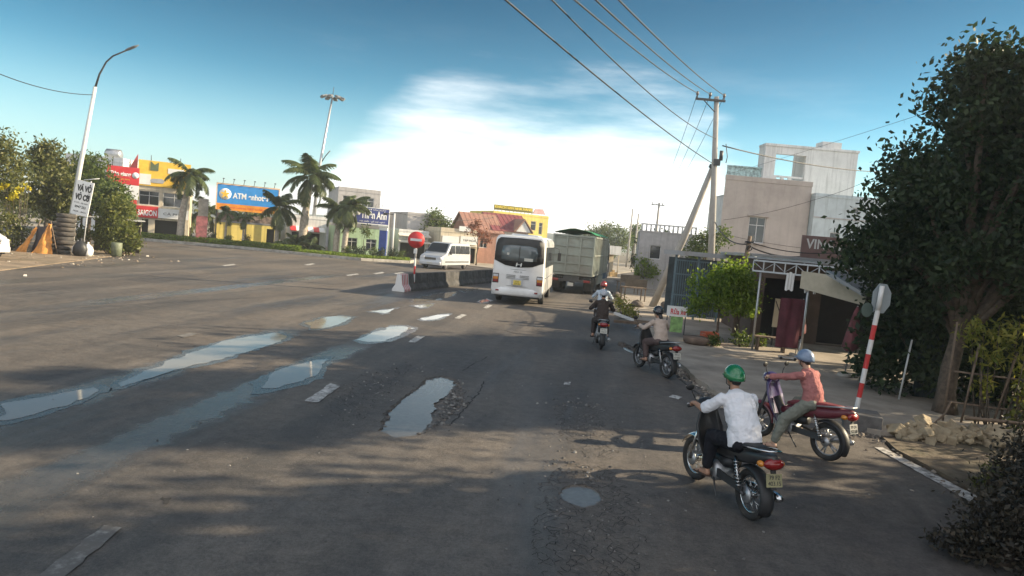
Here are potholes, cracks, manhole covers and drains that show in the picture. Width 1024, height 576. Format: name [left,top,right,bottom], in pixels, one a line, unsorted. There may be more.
crack [449,357,487,426]
pothole [378,375,465,438]
crack [530,463,647,576]
